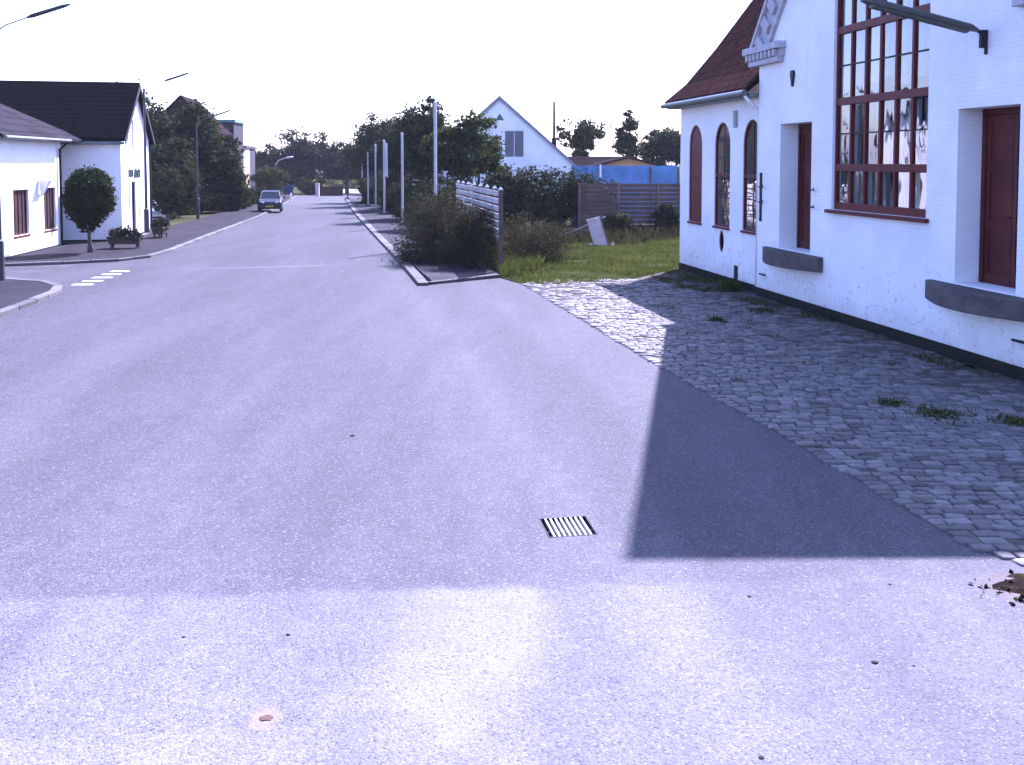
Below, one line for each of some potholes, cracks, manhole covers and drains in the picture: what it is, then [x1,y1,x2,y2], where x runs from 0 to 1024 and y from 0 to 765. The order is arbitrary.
drain grate [539,516,598,538]
